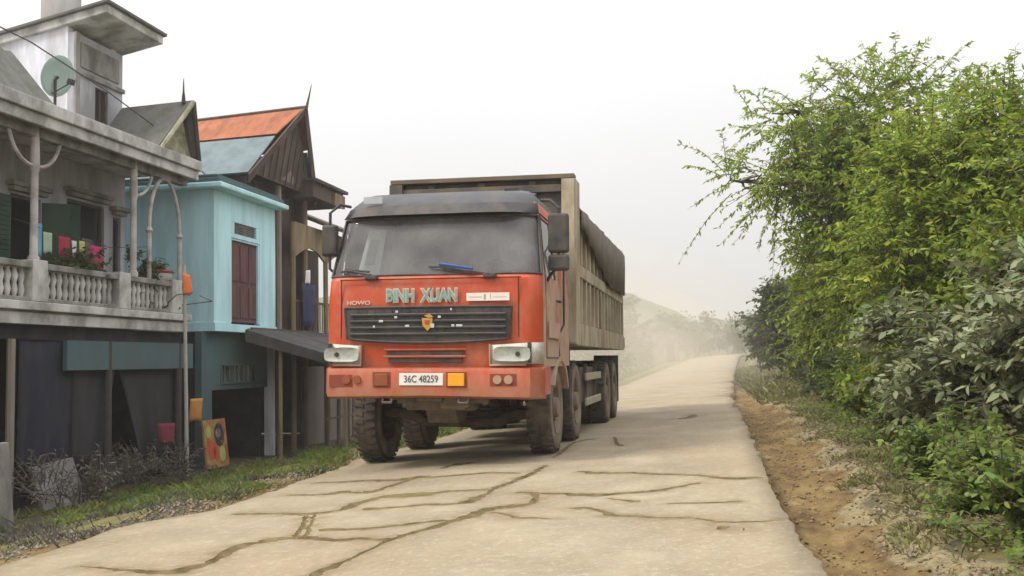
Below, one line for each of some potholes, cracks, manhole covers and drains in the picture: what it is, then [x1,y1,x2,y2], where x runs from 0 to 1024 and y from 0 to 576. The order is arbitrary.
crack [79,439,784,576]
